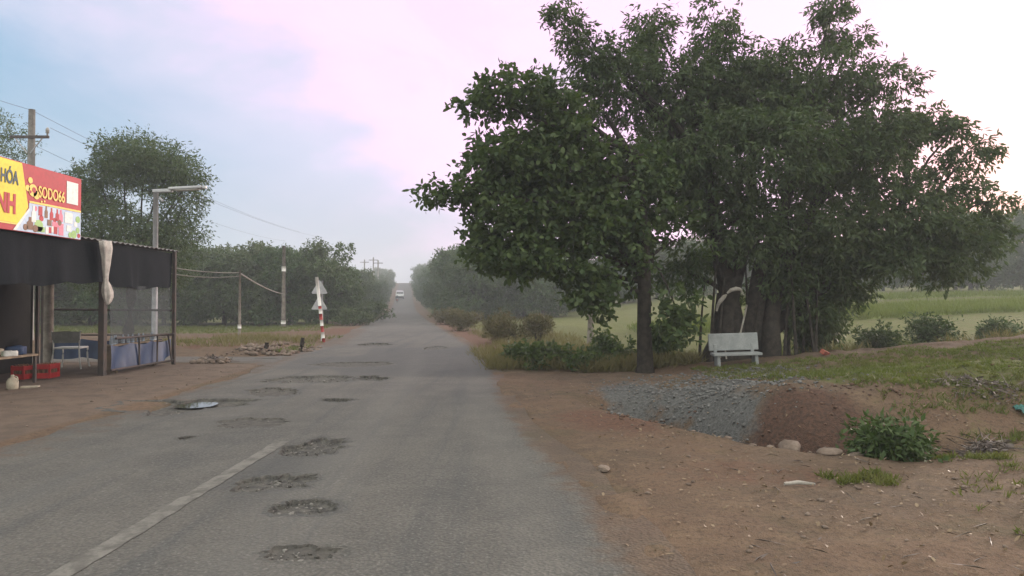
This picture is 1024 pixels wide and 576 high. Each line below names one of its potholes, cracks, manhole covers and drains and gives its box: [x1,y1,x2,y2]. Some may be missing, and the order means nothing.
pothole [252,542,350,565]
pothole [244,387,301,397]
pothole [260,497,345,517]
pothole [223,472,324,494]
pothole [213,417,294,429]
pothole [256,375,361,384]
pothole [273,437,353,458]
